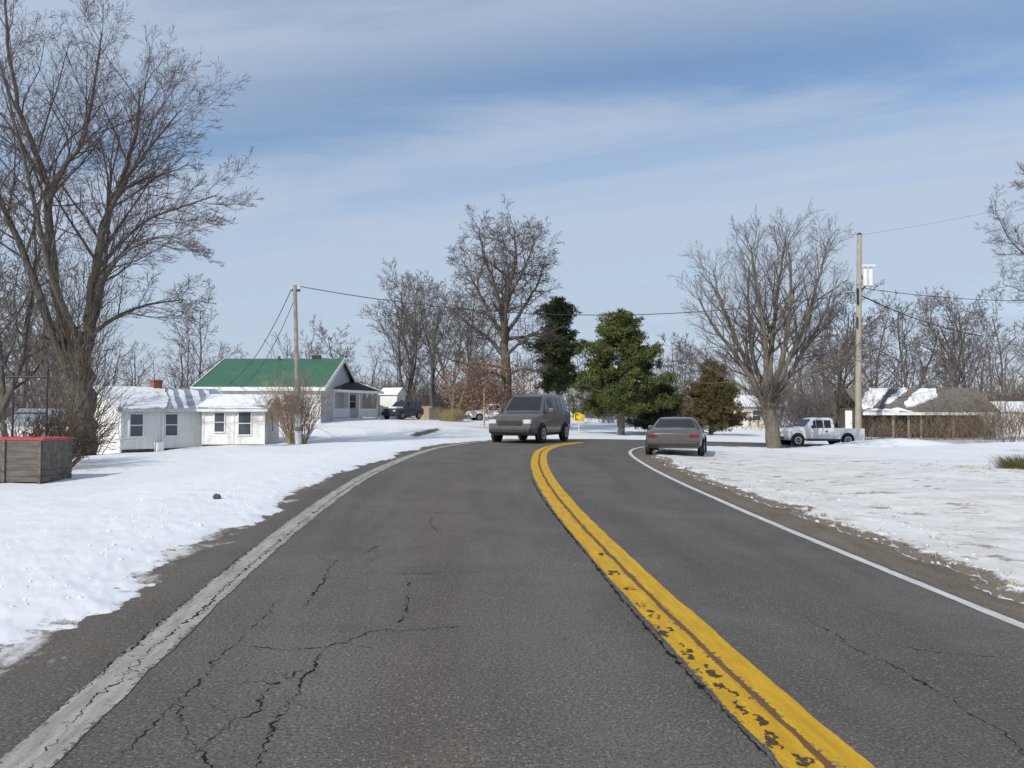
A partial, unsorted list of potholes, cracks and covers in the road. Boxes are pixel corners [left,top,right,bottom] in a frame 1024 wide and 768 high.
crack [107,581,459,768]
crack [29,462,395,768]
crack [803,614,1024,755]
